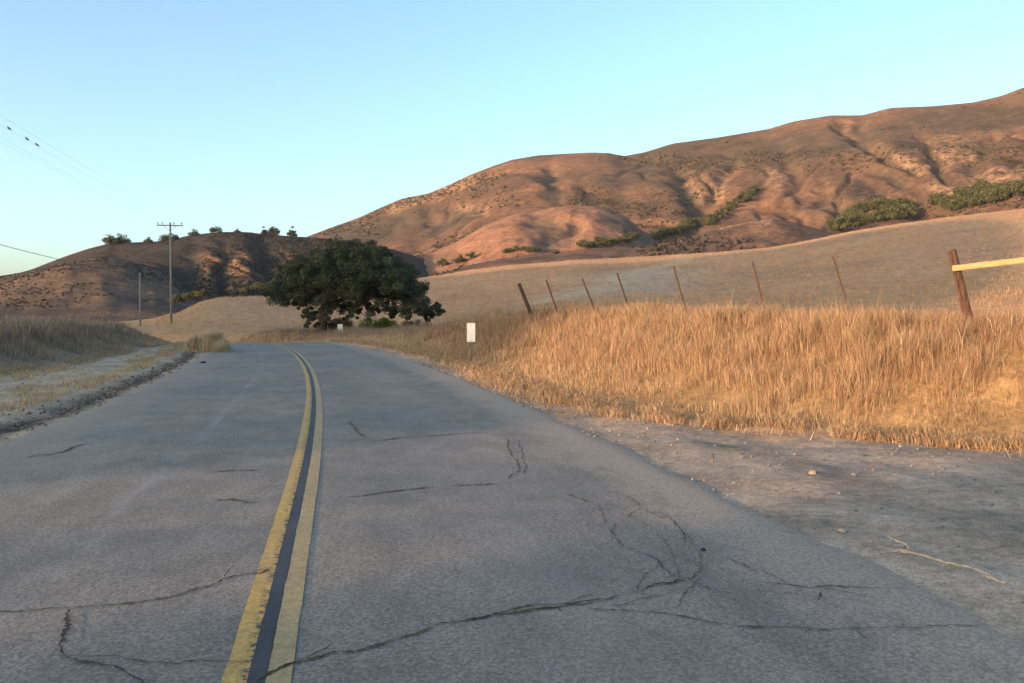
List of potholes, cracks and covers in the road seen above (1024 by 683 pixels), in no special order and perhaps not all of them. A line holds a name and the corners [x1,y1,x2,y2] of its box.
crack [4,567,271,683]
crack [348,422,478,441]
crack [251,492,1024,683]
crack [350,440,527,497]
